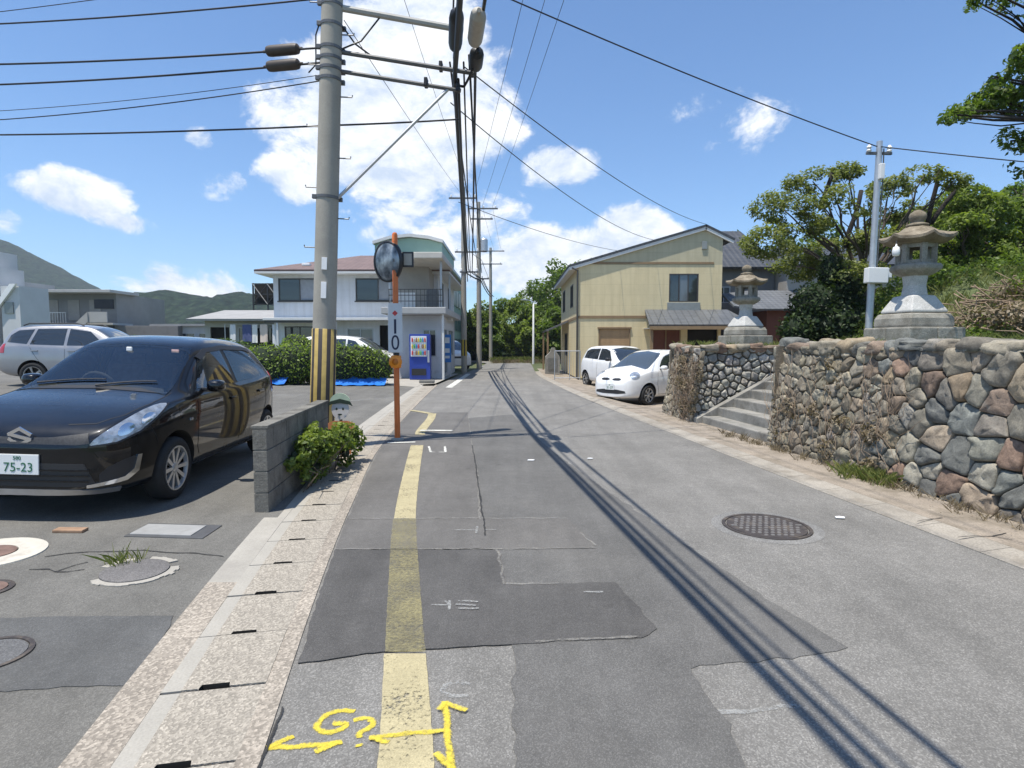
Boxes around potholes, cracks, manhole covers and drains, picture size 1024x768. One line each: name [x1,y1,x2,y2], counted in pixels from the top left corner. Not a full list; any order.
crack [29,550,221,572]
utility cover [0,537,49,566]
utility cover [0,579,16,594]
crack [472,445,486,535]
manhole cover [711,511,826,544]
manhole cover [0,635,36,668]
